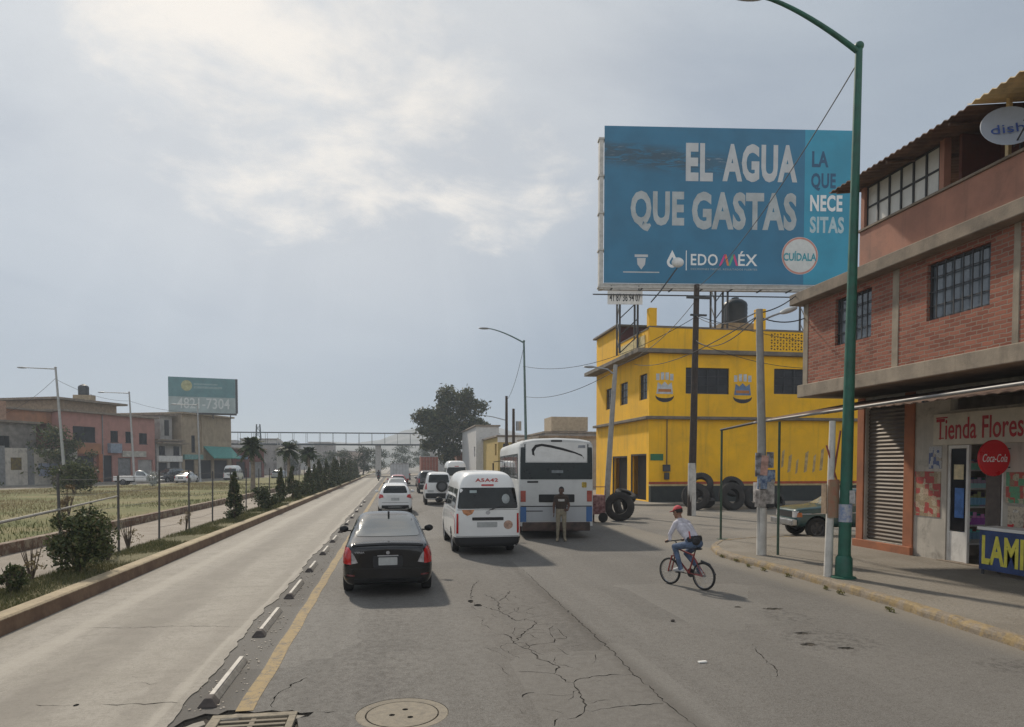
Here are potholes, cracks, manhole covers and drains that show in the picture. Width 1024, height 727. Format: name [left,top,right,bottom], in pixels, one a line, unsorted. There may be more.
manhole cover [355,698,449,727]
drain grate [205,711,298,727]
crack [464,581,663,726]
